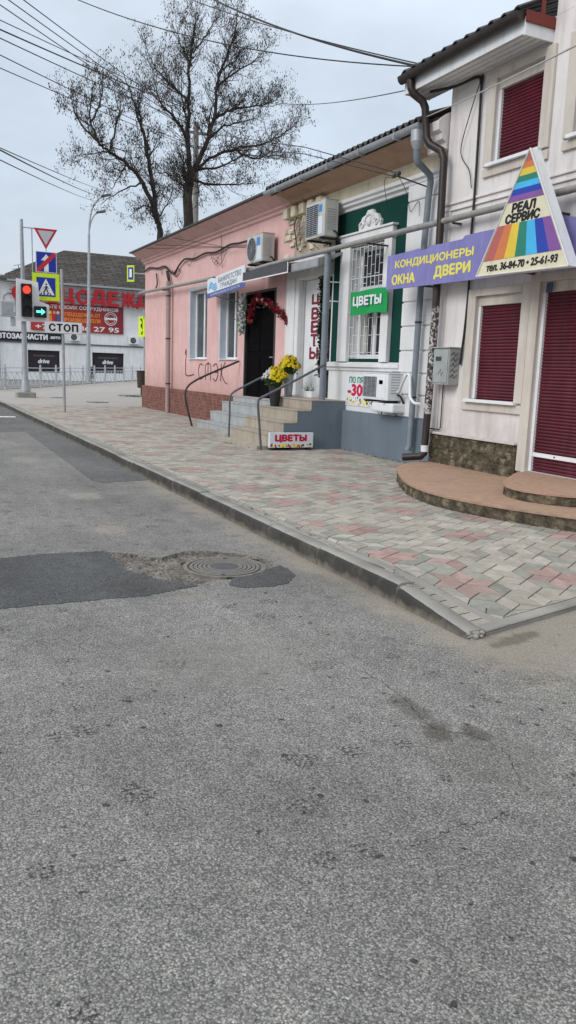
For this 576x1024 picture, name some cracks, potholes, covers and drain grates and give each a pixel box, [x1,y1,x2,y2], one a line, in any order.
pothole [107,551,274,585]
manhole cover [180,557,266,579]
